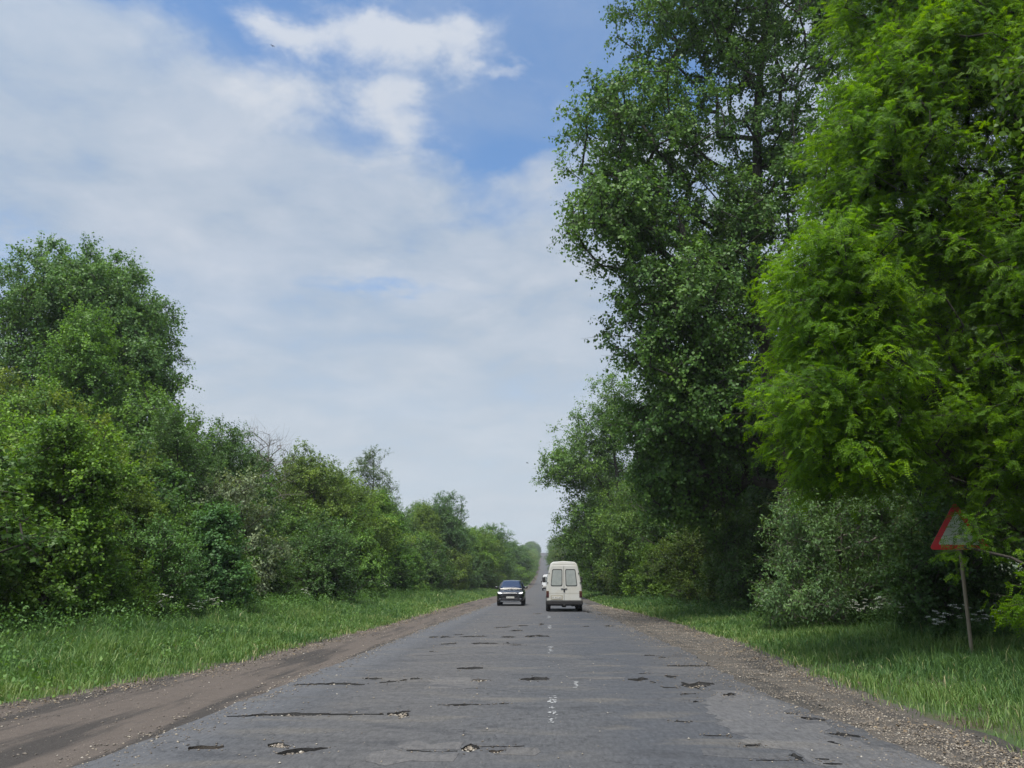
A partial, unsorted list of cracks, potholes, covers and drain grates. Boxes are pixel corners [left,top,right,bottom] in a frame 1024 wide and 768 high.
pothole [681,681,714,690]
pothole [278,747,328,755]
